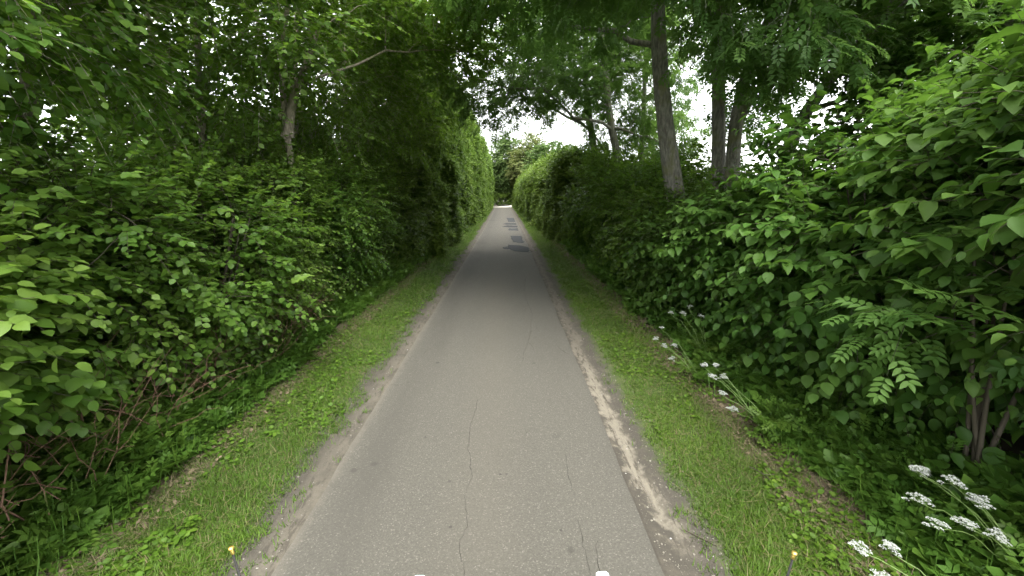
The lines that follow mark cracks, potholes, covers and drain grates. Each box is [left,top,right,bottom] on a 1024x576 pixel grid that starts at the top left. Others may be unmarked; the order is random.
crack [459,402,477,575]
